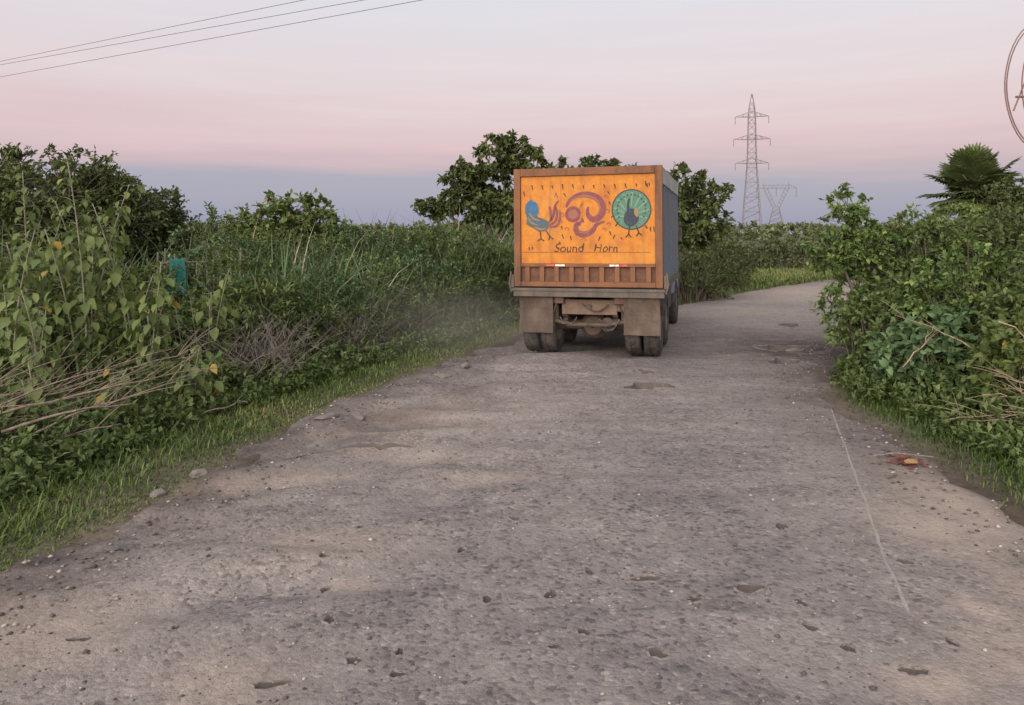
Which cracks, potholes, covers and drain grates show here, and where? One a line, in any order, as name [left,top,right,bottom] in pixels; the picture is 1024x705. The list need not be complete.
crack [831,409,911,616]
pothole [249,679,294,689]
pothole [768,356,804,365]
pothole [897,664,931,677]
pothole [733,582,768,593]
pothole [622,382,676,390]
